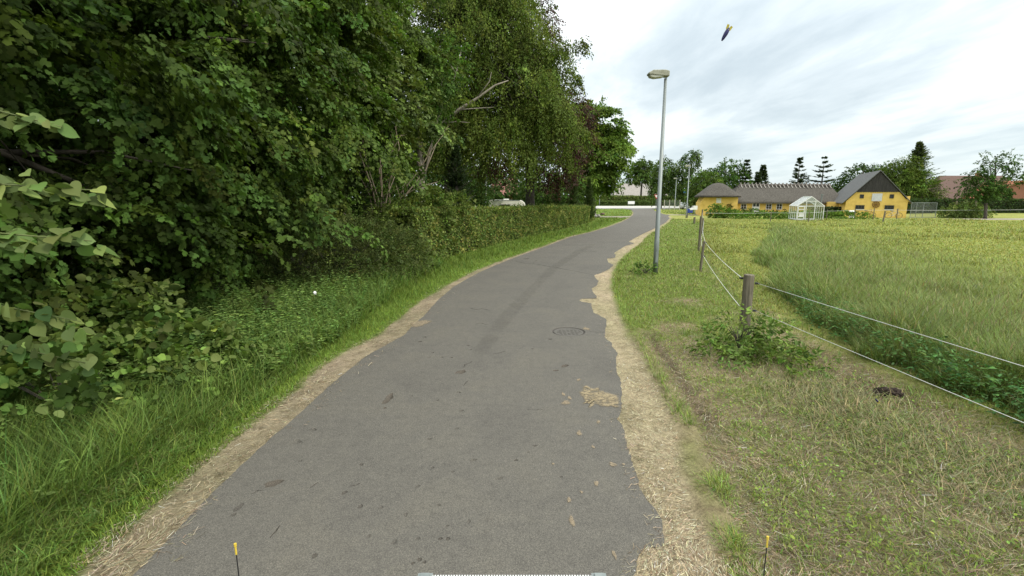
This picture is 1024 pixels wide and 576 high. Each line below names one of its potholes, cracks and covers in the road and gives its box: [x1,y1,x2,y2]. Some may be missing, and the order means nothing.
manhole cover [552,327,585,336]
